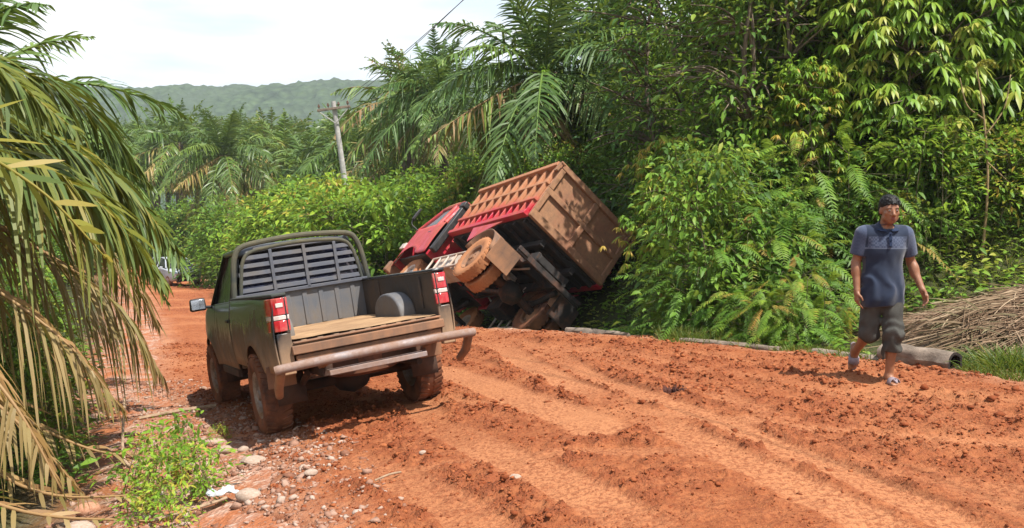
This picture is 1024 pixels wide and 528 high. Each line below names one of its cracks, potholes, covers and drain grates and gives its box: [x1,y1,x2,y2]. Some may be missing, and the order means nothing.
pothole [660,385,687,394]
